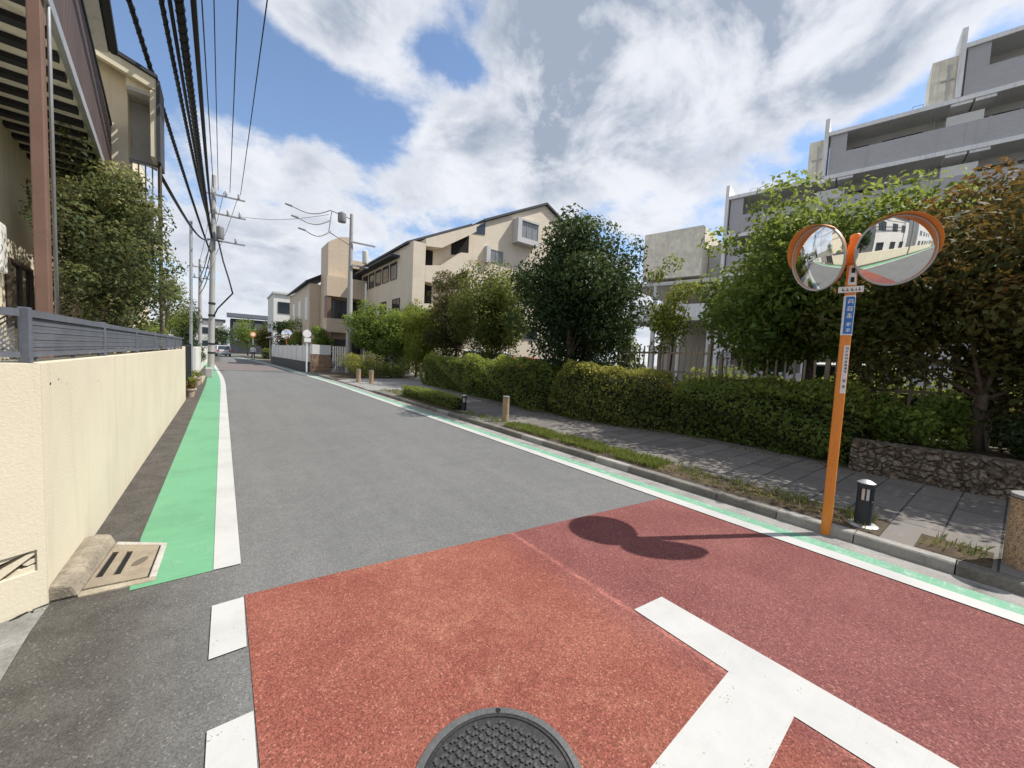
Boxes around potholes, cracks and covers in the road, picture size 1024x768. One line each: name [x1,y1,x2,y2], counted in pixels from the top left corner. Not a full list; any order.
manhole cover [416,707,582,768]
drain grate [49,534,167,602]
